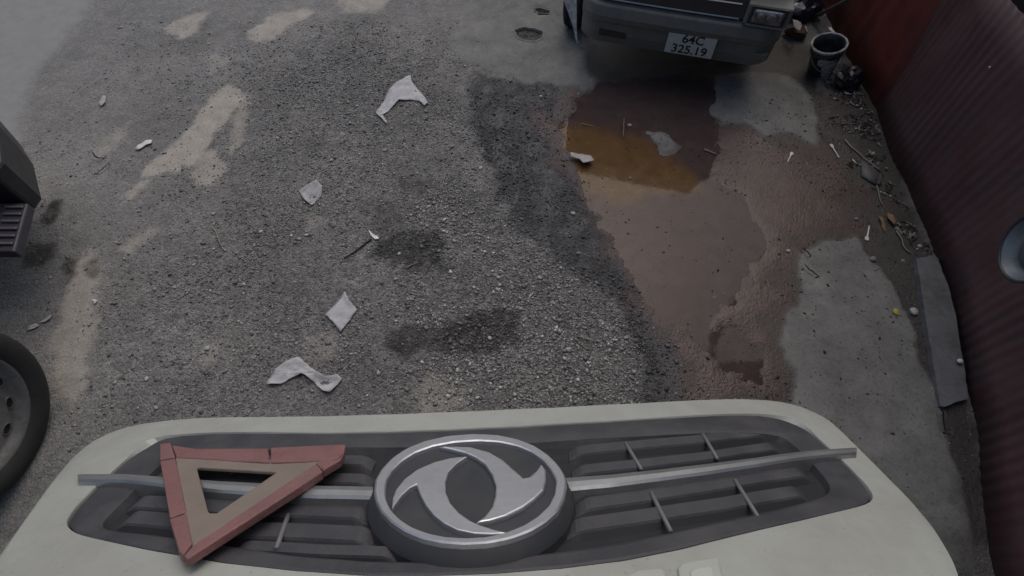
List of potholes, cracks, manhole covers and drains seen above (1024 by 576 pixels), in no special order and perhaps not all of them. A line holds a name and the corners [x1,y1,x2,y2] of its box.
crack [801,248,822,278]
pothole [512,26,546,42]
